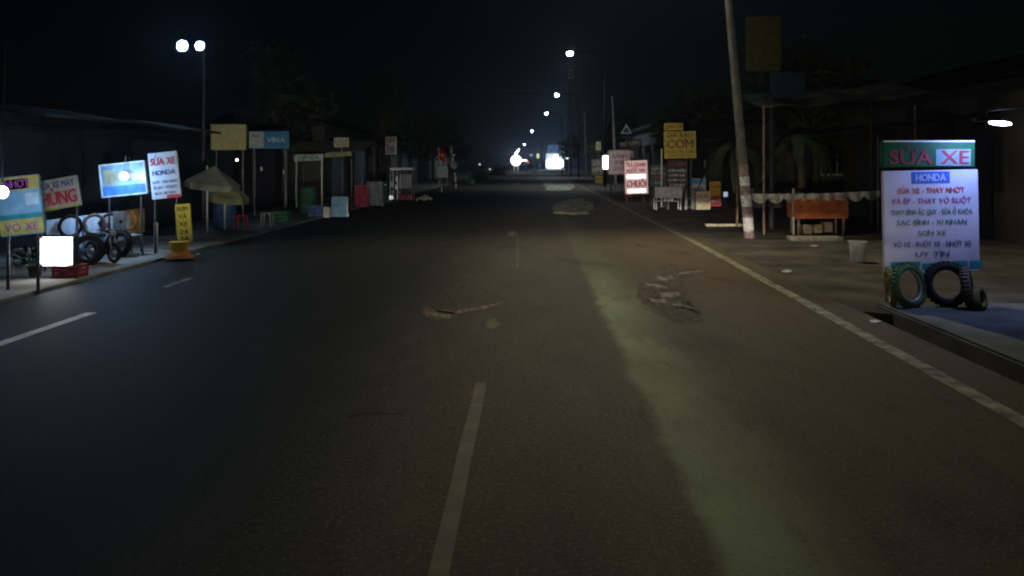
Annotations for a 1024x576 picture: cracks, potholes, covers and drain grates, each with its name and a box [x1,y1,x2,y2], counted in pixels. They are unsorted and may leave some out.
pothole [637,264,707,325]
pothole [421,302,505,320]
